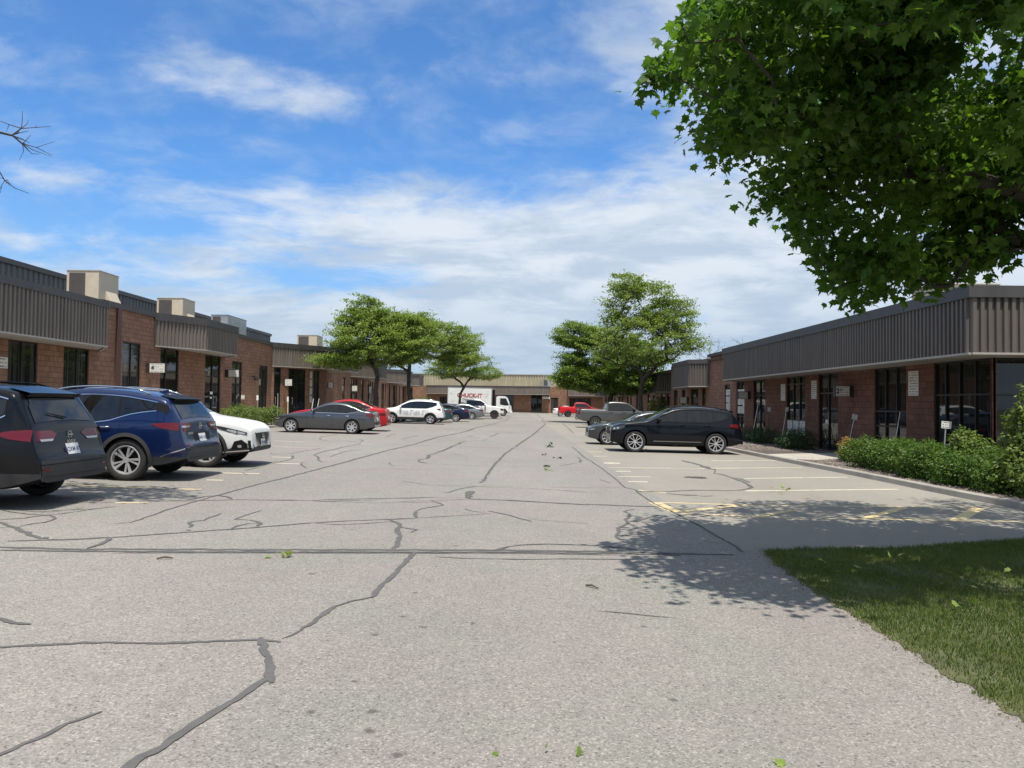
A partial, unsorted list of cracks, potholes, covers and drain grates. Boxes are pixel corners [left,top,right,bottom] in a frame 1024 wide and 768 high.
crack [331,450,609,493]
